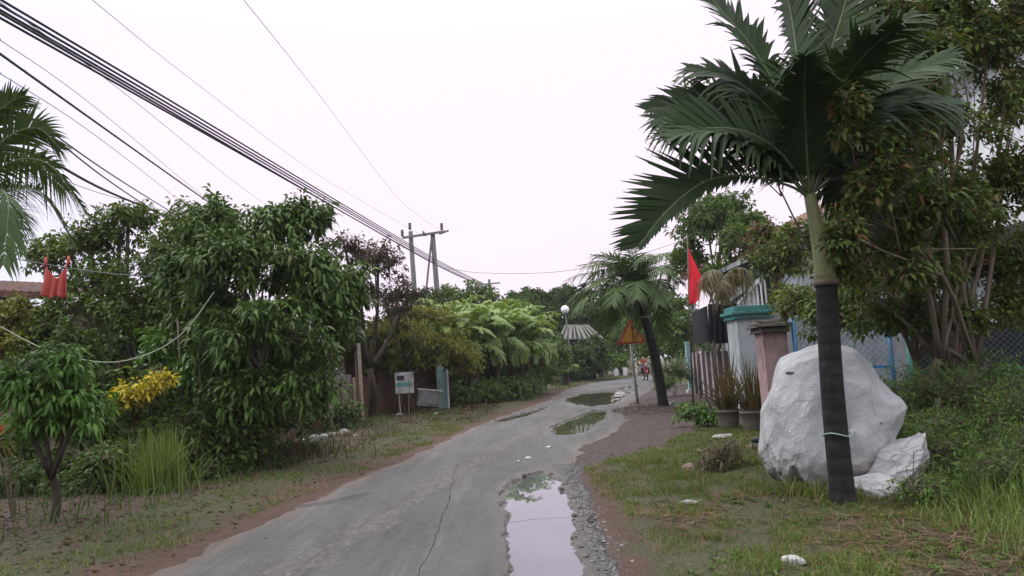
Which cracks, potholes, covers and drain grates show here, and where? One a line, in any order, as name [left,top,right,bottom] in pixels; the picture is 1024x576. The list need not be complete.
crack [418,458,461,576]
pothole [494,407,548,422]
pothole [563,390,630,407]
pothole [548,409,611,435]
pothole [495,470,589,576]
